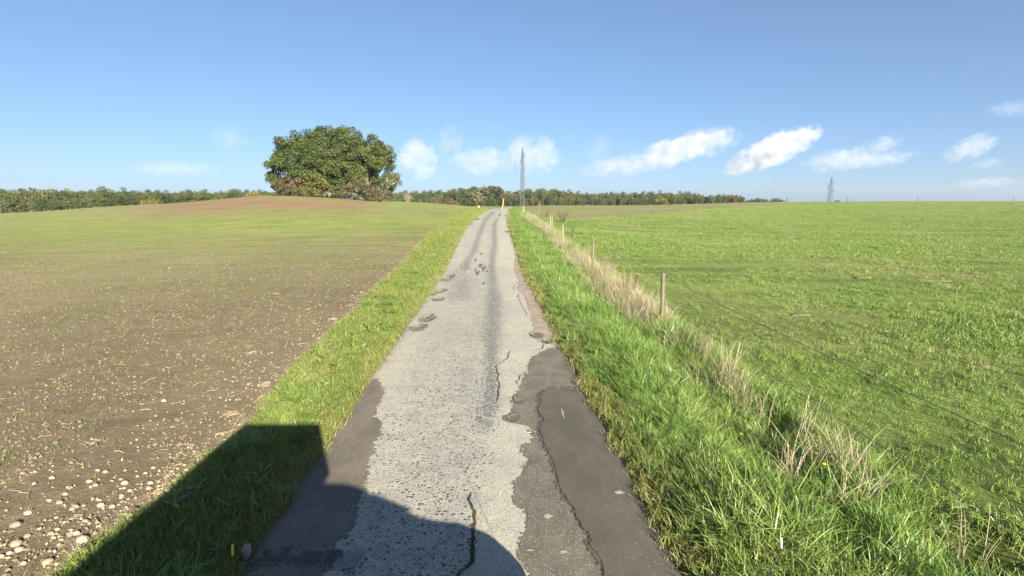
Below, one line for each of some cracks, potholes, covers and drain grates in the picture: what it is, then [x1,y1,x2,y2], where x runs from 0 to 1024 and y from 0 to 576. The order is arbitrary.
crack [456,492,477,576]
crack [492,351,605,576]
